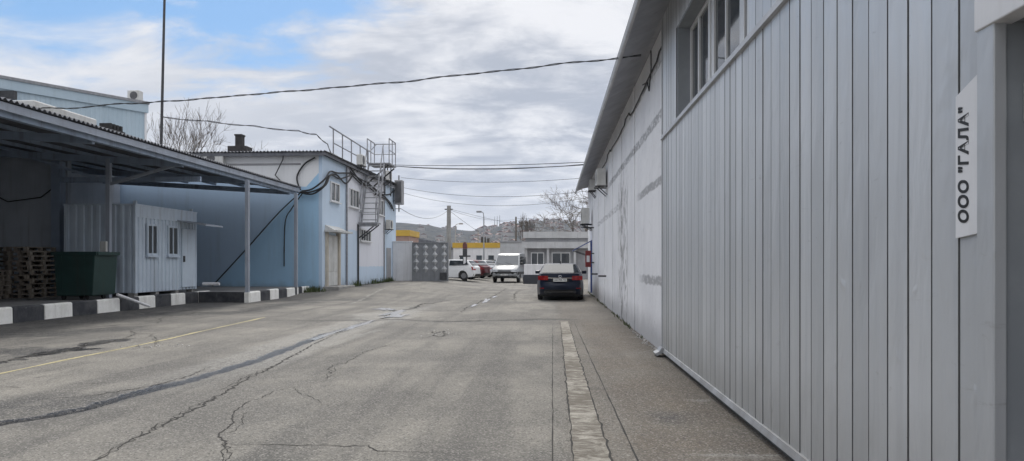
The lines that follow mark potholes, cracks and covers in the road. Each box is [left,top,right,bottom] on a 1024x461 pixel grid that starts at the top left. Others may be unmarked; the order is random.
crack [93,329,451,461]
crack [0,305,279,362]
